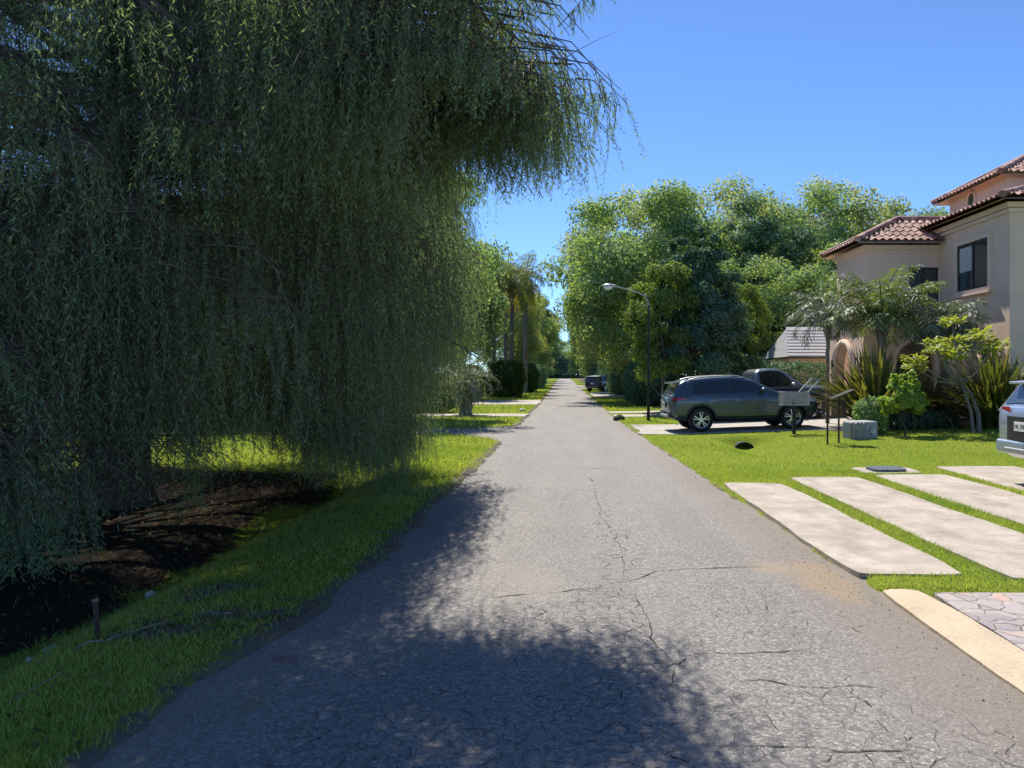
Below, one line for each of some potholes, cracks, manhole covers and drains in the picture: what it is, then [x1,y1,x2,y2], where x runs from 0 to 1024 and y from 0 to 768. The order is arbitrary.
crack [263,468,863,768]
